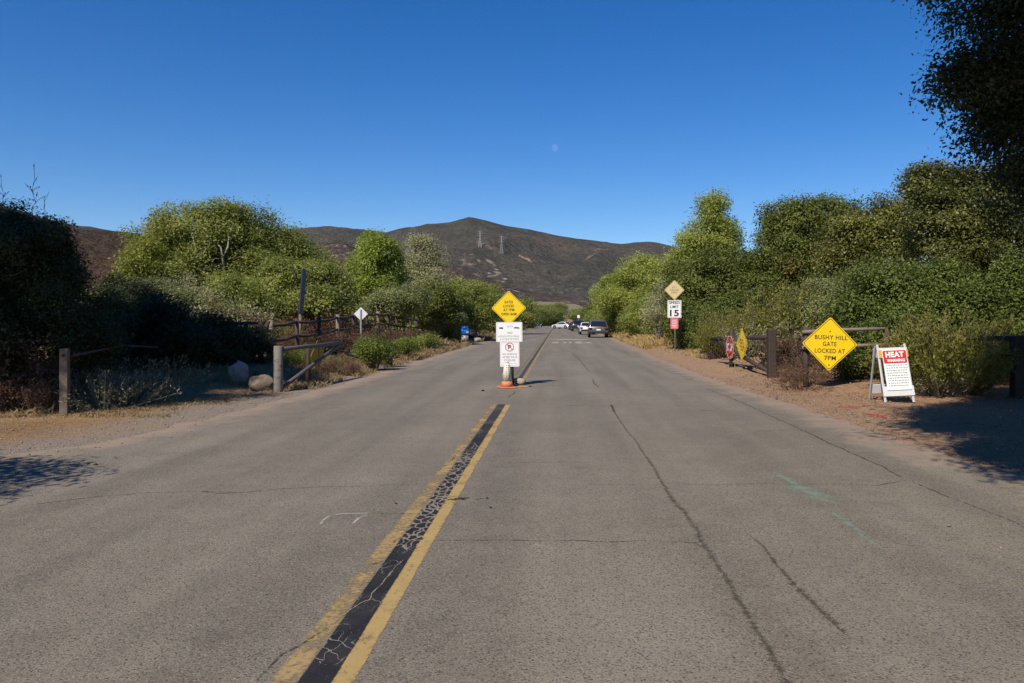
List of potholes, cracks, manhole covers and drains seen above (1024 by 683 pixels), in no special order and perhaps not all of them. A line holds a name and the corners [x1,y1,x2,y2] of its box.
crack [15,484,419,507]
crack [257,560,403,680]
crack [611,390,1020,683]
